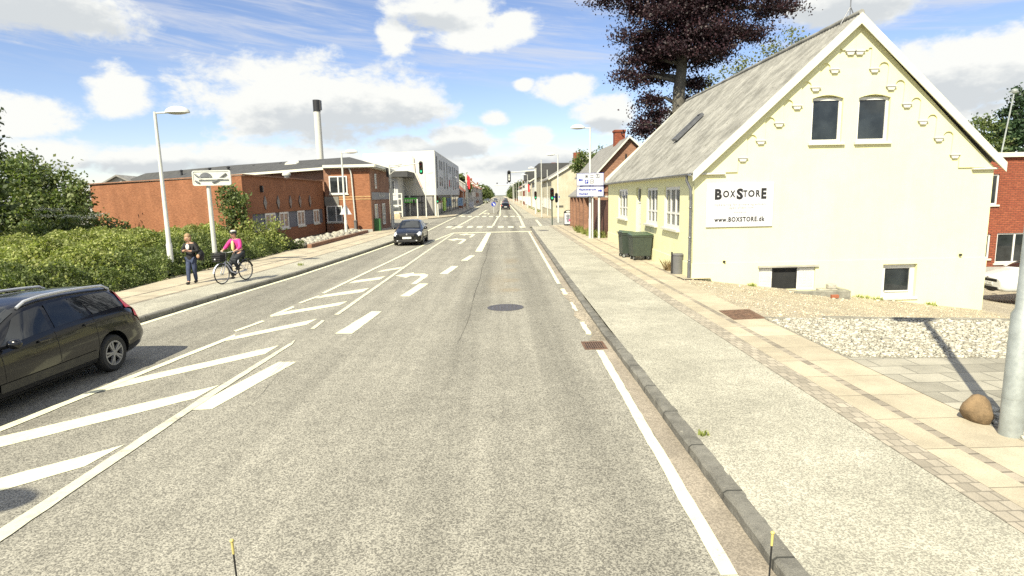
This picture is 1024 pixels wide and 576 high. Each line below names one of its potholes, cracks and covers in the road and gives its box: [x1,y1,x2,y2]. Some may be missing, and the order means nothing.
drain grate [581,341,608,350]
